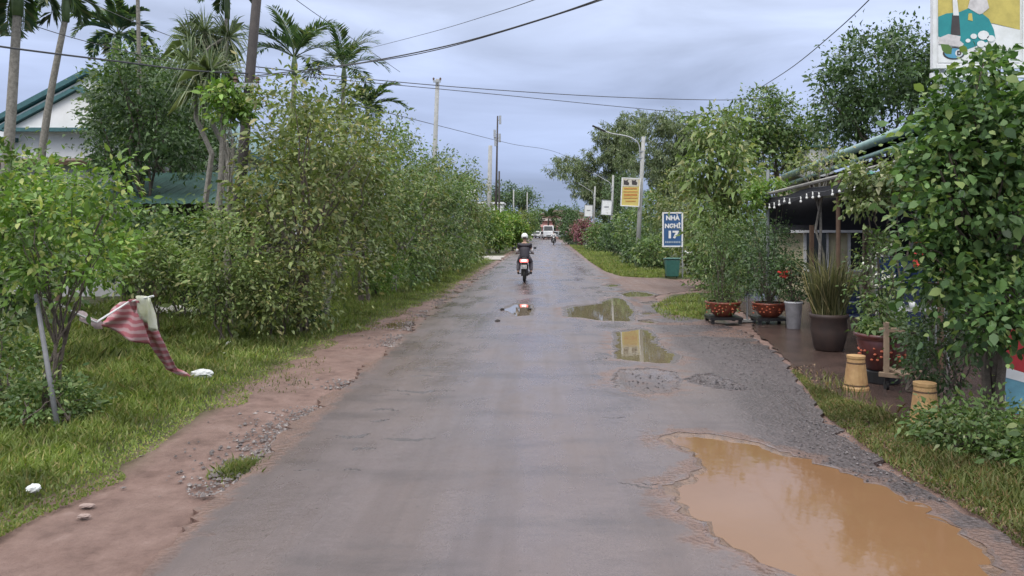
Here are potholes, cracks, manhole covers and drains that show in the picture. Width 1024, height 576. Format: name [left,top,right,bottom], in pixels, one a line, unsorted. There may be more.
pothole [655,431,1014,576]
pothole [560,297,636,322]
pothole [609,367,684,395]
pothole [682,373,750,391]
pothole [610,327,683,364]
pothole [498,303,537,317]
